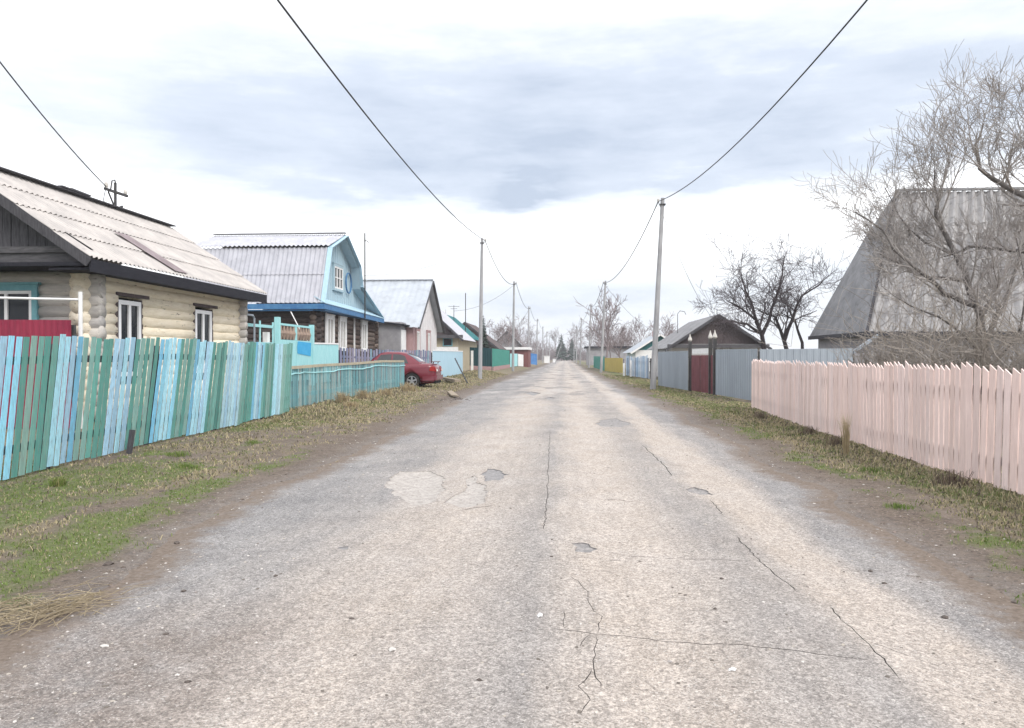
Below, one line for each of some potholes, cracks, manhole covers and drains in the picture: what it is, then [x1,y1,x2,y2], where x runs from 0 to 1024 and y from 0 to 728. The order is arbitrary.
pothole [481,469,509,481]
crack [553,578,866,711]
crack [576,538,795,590]
pothole [686,487,713,495]
crack [829,606,941,678]
pothole [595,419,629,427]
pothole [572,542,597,553]
